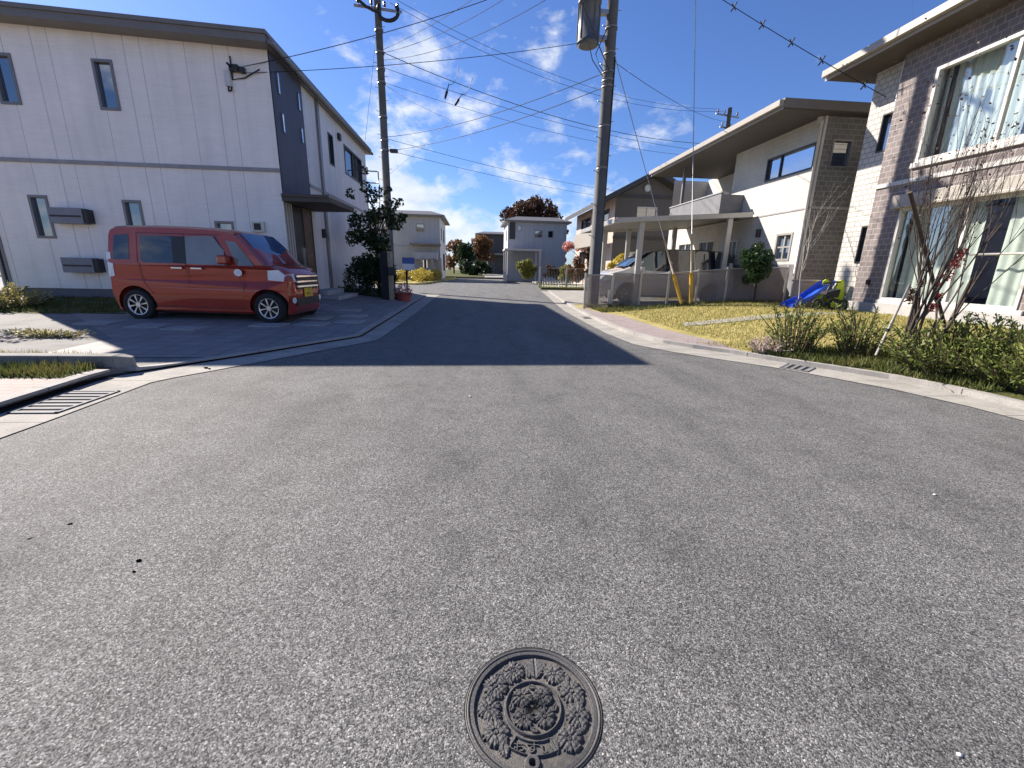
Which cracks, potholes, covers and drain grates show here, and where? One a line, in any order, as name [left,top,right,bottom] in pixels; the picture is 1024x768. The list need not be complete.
drain grate [779,363,816,372]
drain grate [7,390,120,414]
manhole cover [465,648,603,768]
